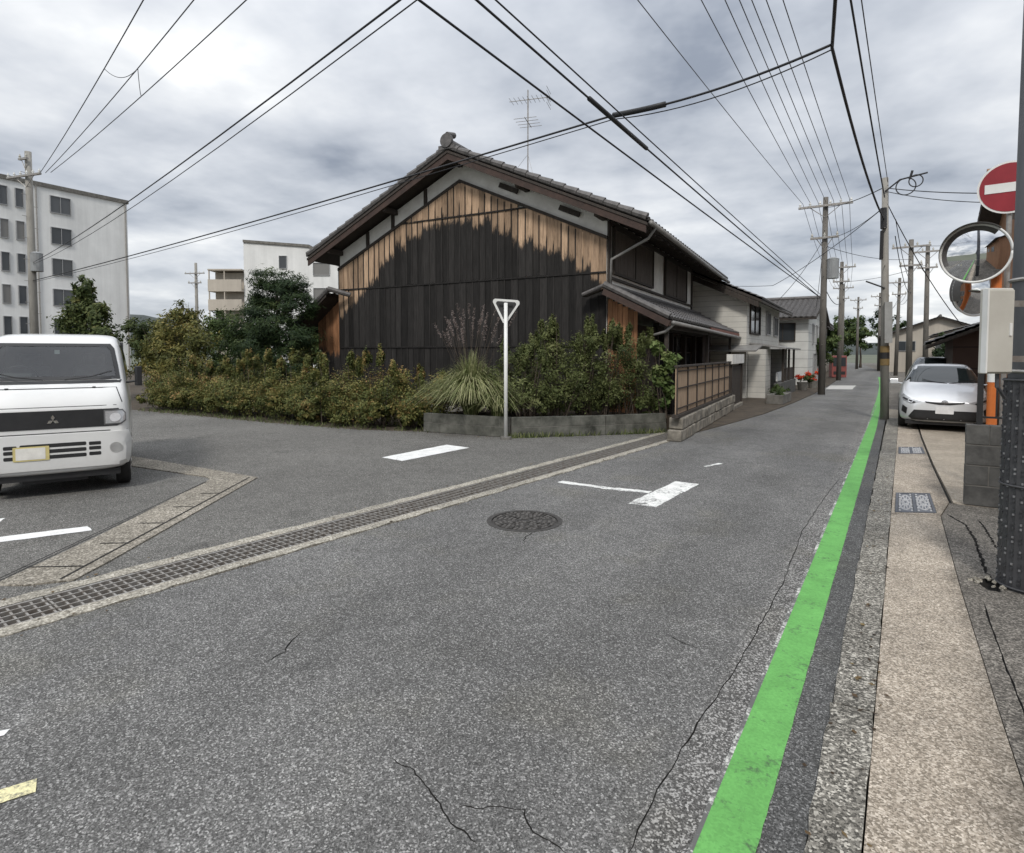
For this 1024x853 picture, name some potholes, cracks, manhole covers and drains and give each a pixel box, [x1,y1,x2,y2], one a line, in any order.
drain grate [44,556,219,612]
crack [947,514,997,576]
manhole cover [487,510,563,532]
crack [984,604,1024,713]
crack [391,758,566,853]
manhole cover [895,492,936,513]
drain grate [199,528,330,567]
drain grate [309,506,414,535]
drain grate [0,597,59,628]
